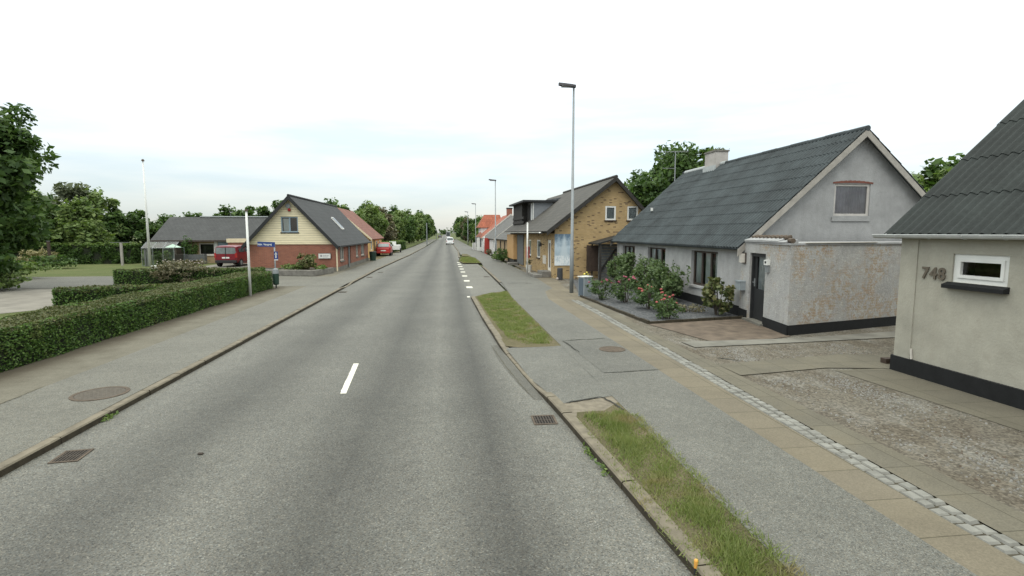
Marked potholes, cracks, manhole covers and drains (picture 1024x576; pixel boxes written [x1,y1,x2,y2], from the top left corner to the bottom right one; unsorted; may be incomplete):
drain grate [531,415,558,425]
manhole cover [68,386,131,401]
drain grate [47,448,95,464]
